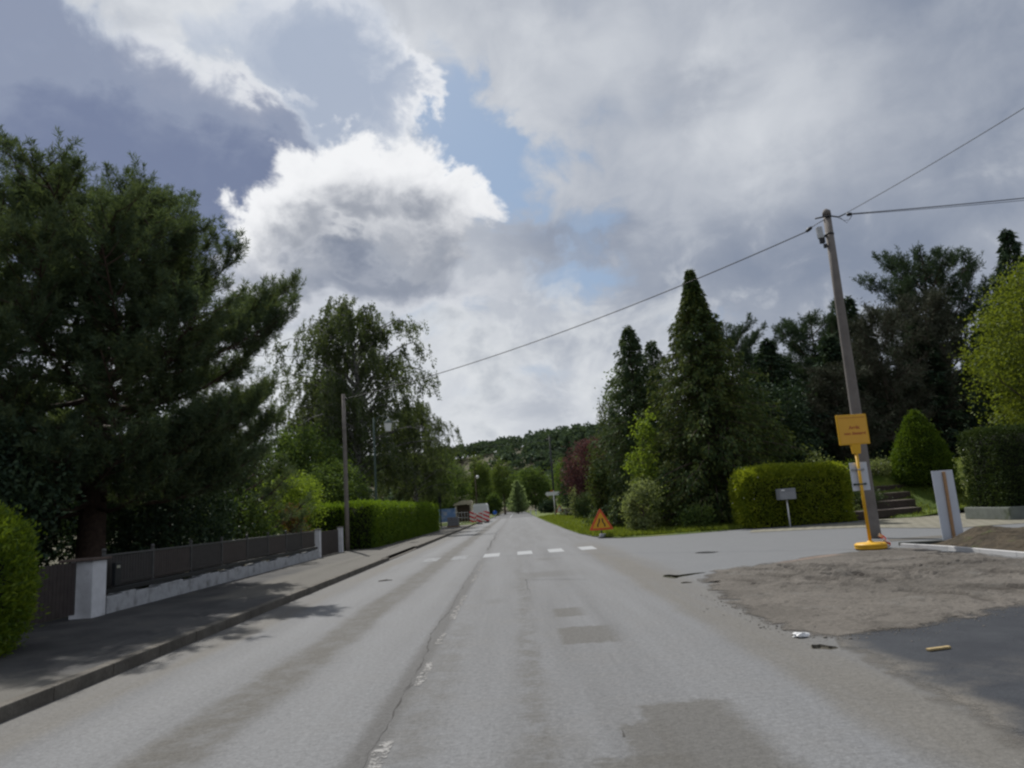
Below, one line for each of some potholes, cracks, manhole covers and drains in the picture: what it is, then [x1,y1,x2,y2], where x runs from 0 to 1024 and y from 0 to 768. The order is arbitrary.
crack [364,529,500,766]
